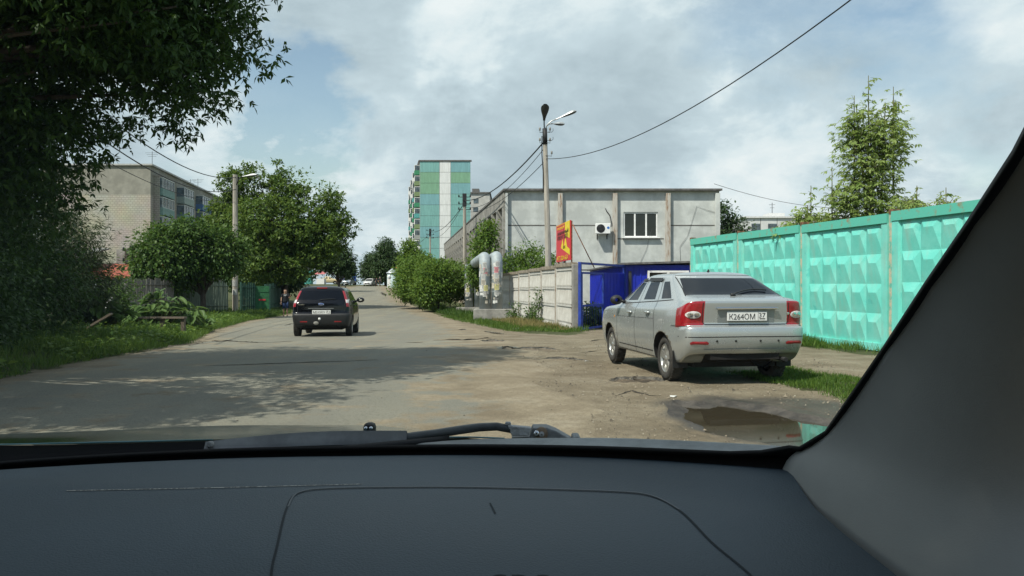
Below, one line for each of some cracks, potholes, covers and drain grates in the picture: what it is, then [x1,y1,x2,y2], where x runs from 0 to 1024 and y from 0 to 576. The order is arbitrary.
crack [446,331,518,349]
pothole [603,376,672,385]
pothole [656,395,834,445]
